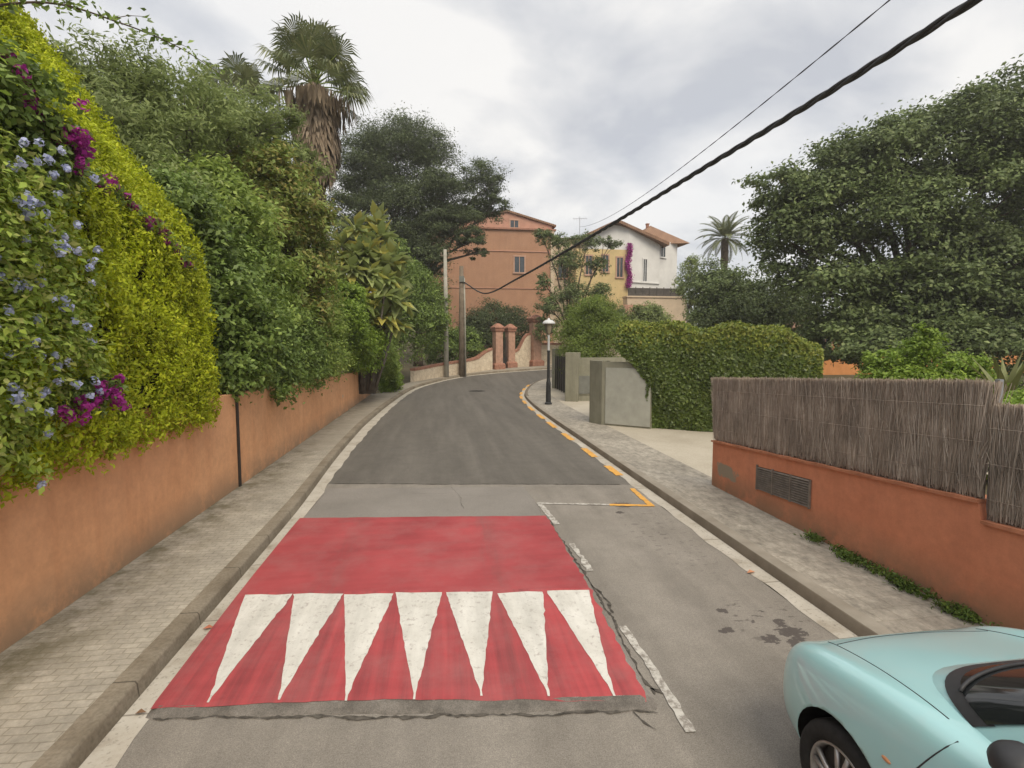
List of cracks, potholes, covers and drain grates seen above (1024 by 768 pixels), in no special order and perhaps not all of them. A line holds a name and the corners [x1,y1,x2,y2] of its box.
crack [551,524,663,694]
